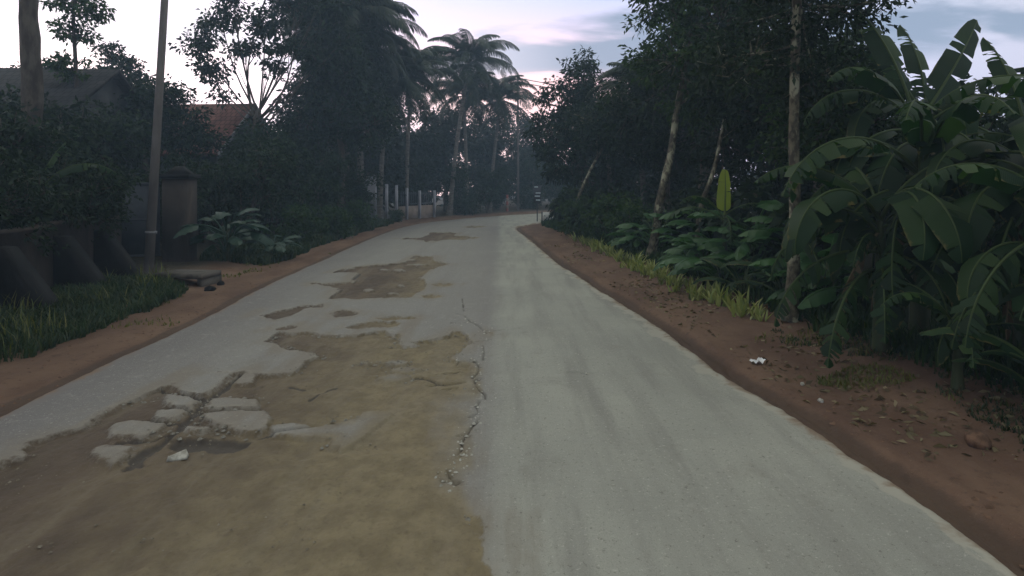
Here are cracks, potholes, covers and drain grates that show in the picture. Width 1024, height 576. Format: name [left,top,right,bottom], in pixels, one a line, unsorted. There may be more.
pothole [325,308,374,319]
pothole [389,231,486,243]
pothole [251,302,332,321]
pothole [306,255,456,301]
pothole [261,323,311,334]
pothole [332,320,412,332]
crack [410,297,569,487]
pothole [0,328,502,576]
